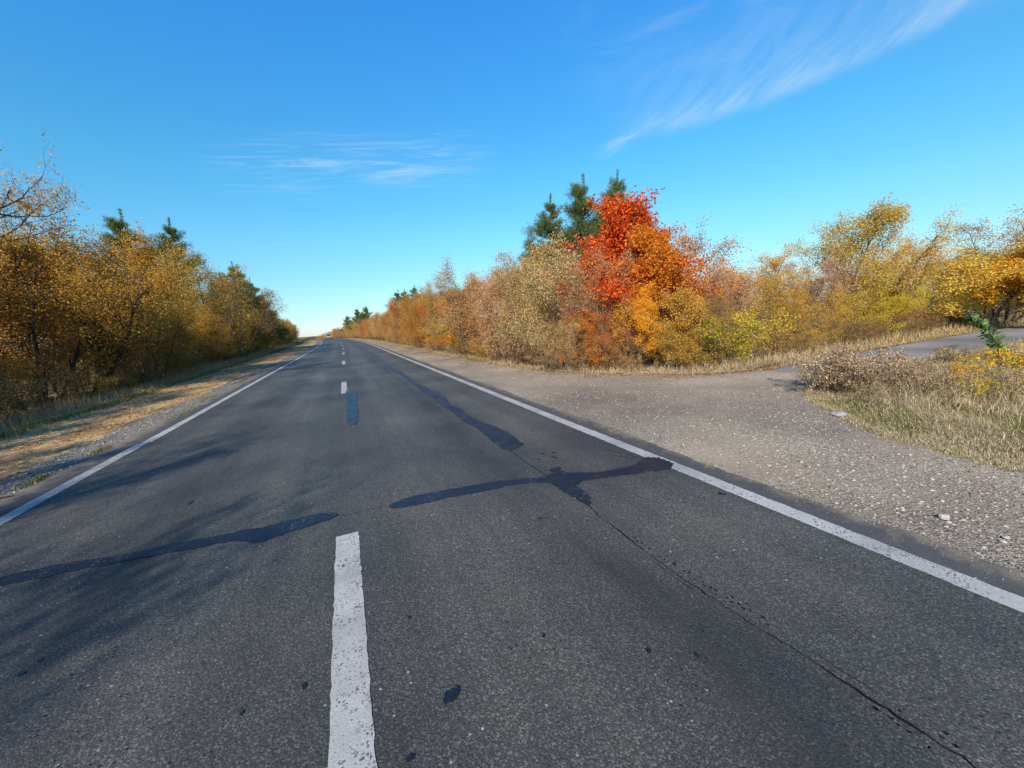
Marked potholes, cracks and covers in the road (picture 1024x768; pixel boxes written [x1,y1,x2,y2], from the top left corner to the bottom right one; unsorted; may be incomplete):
crack [588,505,976,768]
